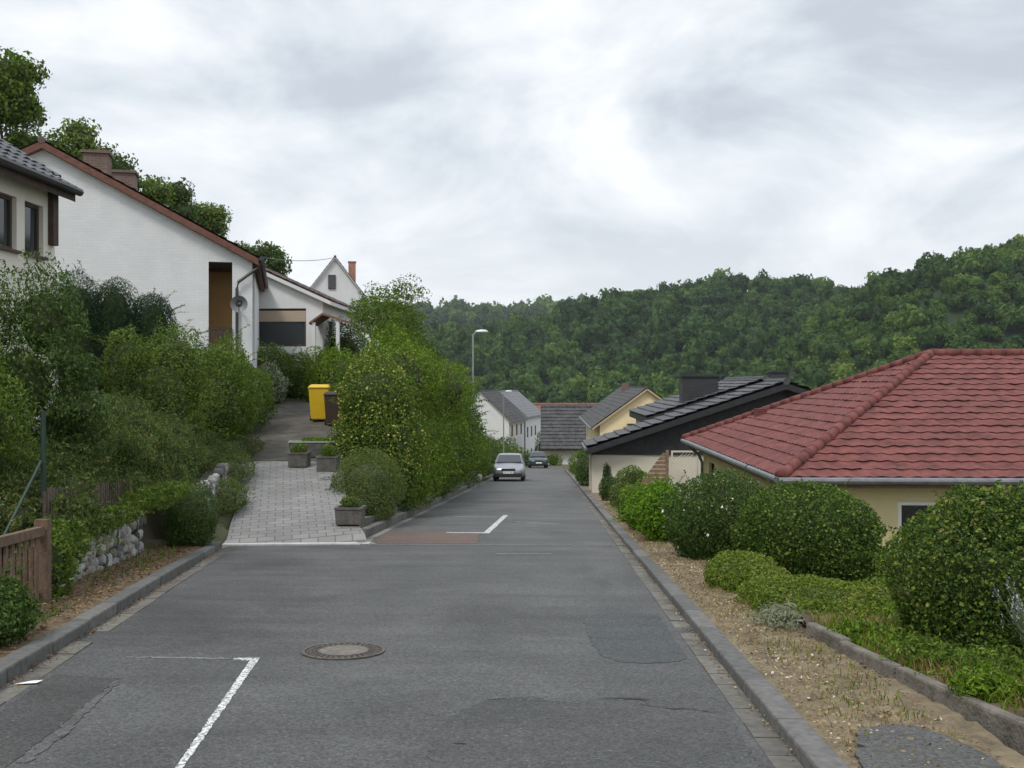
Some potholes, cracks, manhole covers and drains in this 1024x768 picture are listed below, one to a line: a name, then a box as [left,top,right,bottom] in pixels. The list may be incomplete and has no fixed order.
manhole cover [301,642,385,660]
crack [617,697,716,713]
